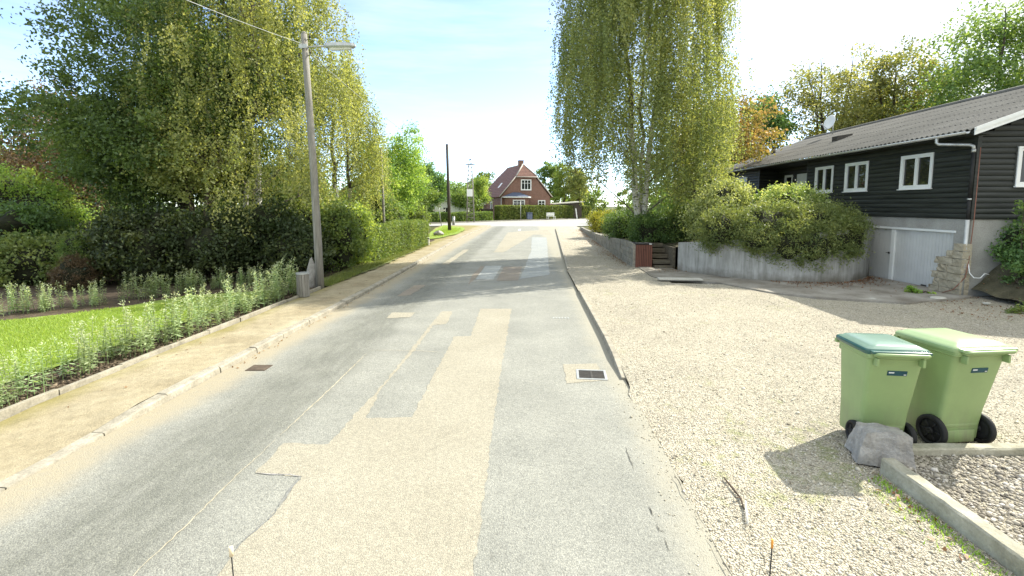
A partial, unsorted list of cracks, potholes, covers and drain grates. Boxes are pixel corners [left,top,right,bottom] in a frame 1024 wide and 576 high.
drain grate [576,369,608,380]
